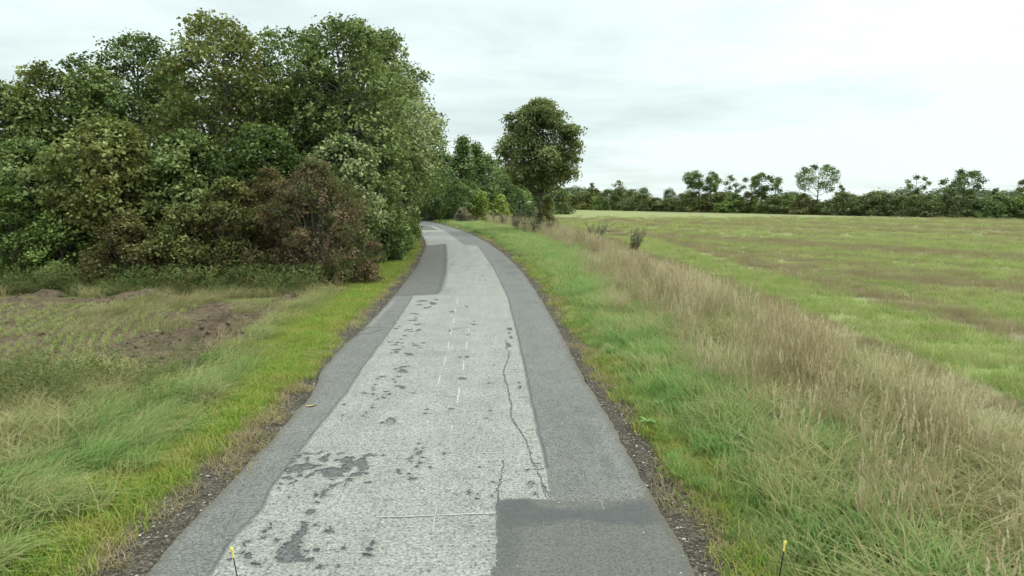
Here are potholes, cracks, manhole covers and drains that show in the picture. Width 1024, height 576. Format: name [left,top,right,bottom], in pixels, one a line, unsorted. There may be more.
pothole [284,461,312,474]
pothole [275,521,308,563]
crack [496,460,504,502]
crack [503,341,551,499]
pothole [314,456,369,478]
